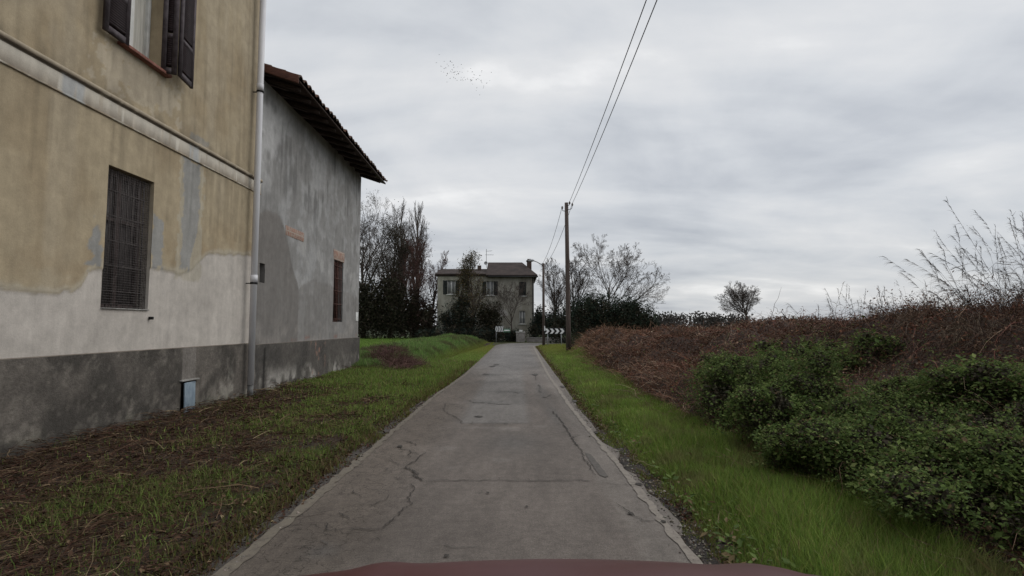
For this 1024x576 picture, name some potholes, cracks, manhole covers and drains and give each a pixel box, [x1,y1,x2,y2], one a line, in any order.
crack [321,374,637,544]
